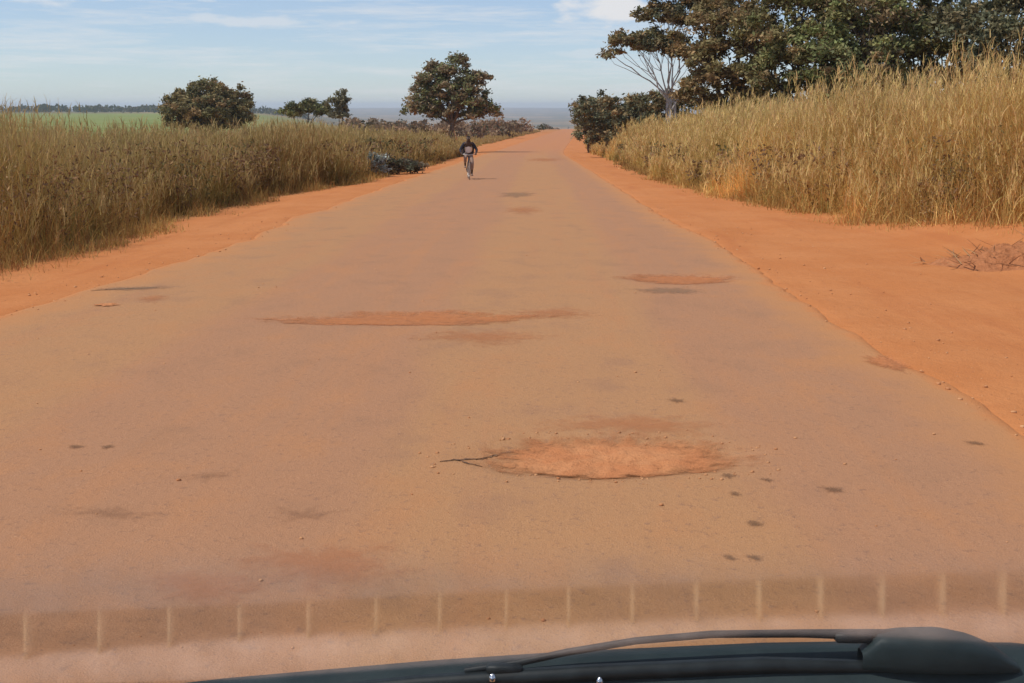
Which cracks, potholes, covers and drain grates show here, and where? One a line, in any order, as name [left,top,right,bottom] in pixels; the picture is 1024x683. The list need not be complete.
pothole [488,436,751,479]
crack [440,449,529,467]
